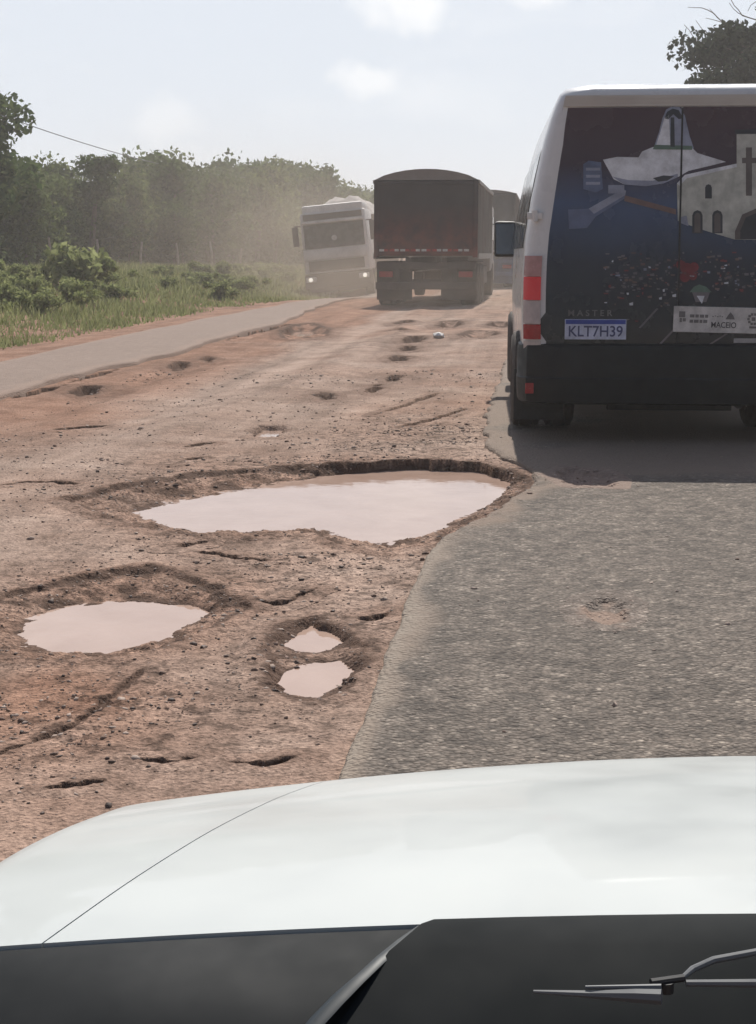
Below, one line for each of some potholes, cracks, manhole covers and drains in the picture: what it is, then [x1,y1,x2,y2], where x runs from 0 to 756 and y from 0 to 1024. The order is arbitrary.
pothole [559,589,650,632]
pothole [155,361,200,373]
pothole [268,322,342,341]
pothole [376,355,422,363]
pothole [375,374,414,383]
pothole [390,335,438,345]
pothole [303,391,348,402]
pothole [0,562,266,667]
pothole [57,385,114,399]
pothole [237,611,389,711]
pothole [233,424,302,440]
pothole [41,458,534,557]
